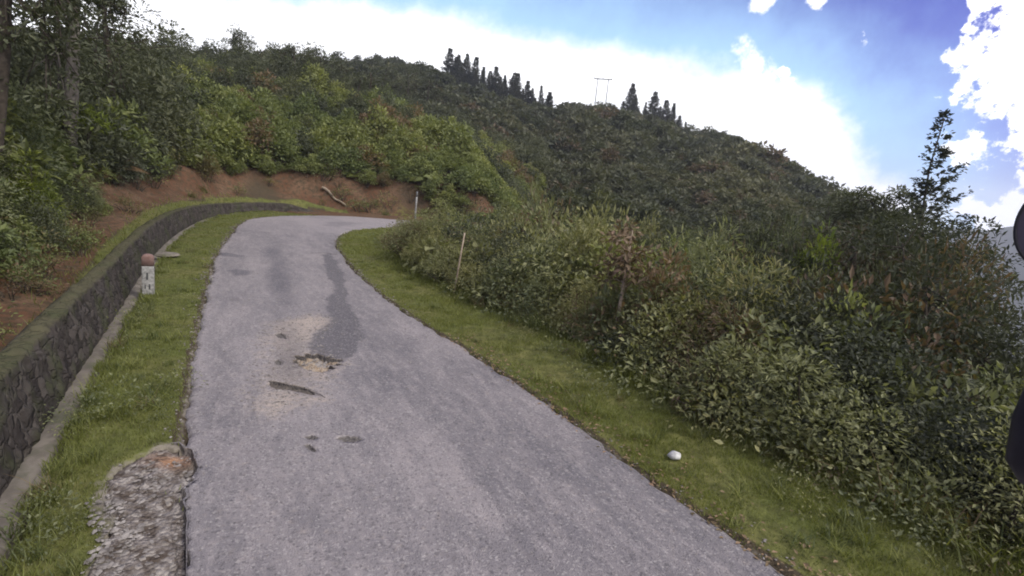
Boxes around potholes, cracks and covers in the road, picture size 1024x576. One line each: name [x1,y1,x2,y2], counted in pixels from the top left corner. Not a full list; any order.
pothole [292,353,344,373]
pothole [267,381,316,395]
